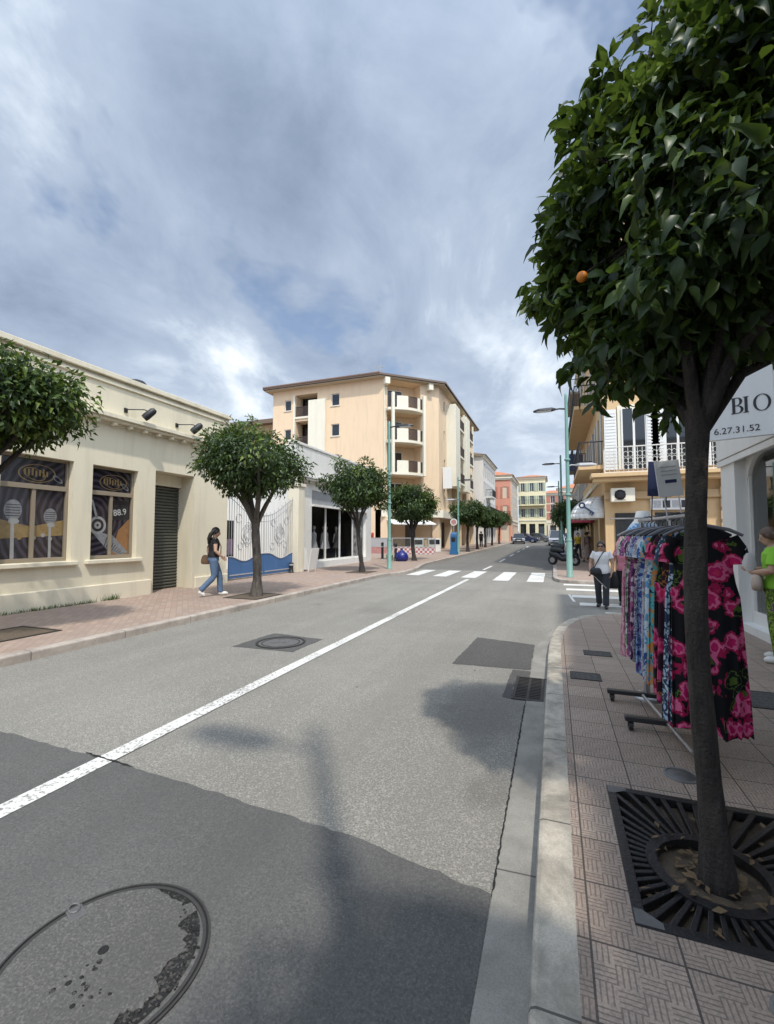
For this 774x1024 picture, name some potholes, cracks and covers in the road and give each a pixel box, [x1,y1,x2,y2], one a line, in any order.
utility cover [663,767,696,784]
utility cover [570,671,602,682]
manhole cover [0,883,211,1024]
crack [86,752,133,767]
manhole cover [256,637,305,649]
drain grate [511,676,545,702]
